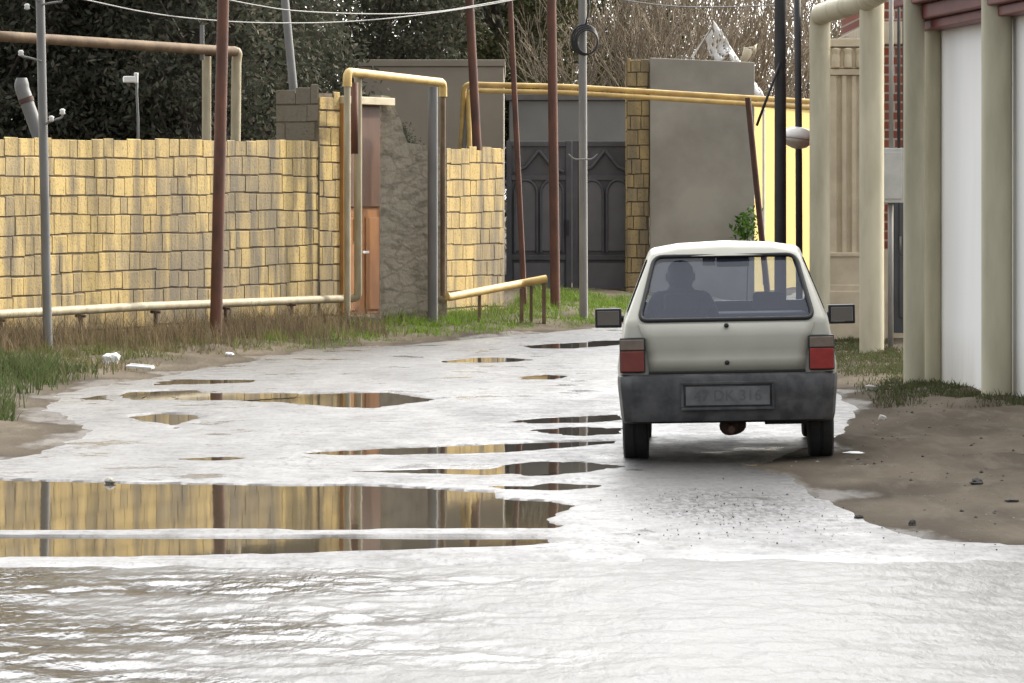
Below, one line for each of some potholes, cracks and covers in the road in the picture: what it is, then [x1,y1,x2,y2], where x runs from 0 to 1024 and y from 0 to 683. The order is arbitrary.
pothole [107,411,226,430]
pothole [105,388,222,401]
pothole [267,438,623,456]
pothole [0,476,605,560]
pothole [156,390,454,410]
